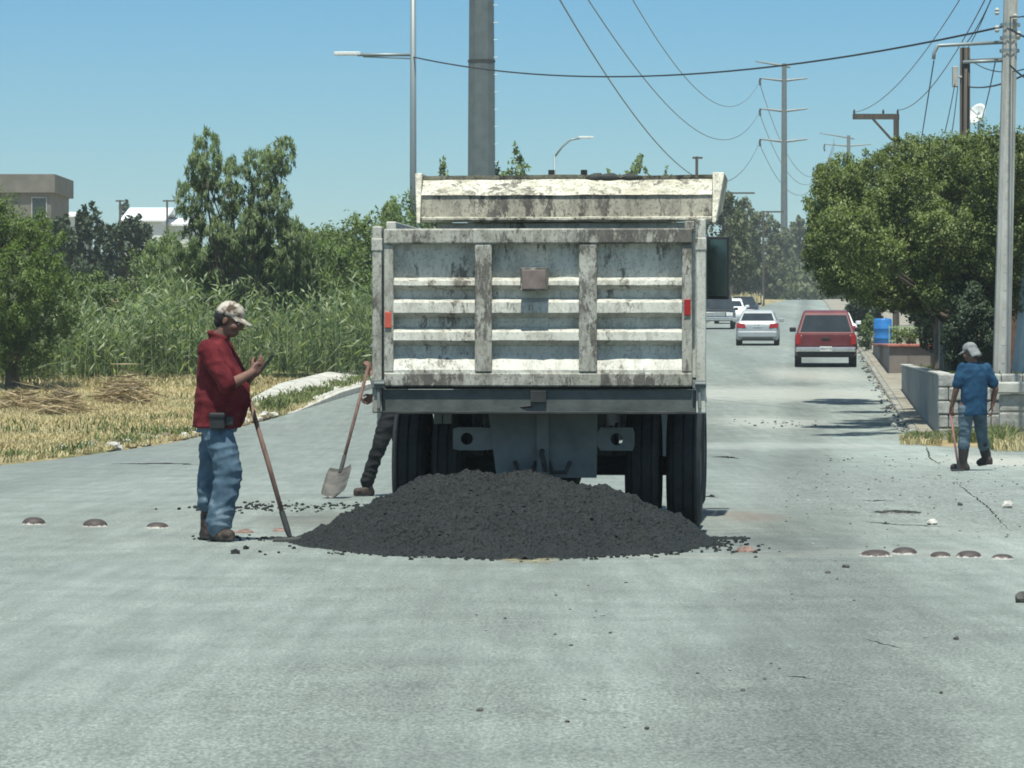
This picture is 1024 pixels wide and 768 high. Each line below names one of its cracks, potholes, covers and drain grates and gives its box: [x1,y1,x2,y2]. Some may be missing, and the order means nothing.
crack [957,483,1010,532]
